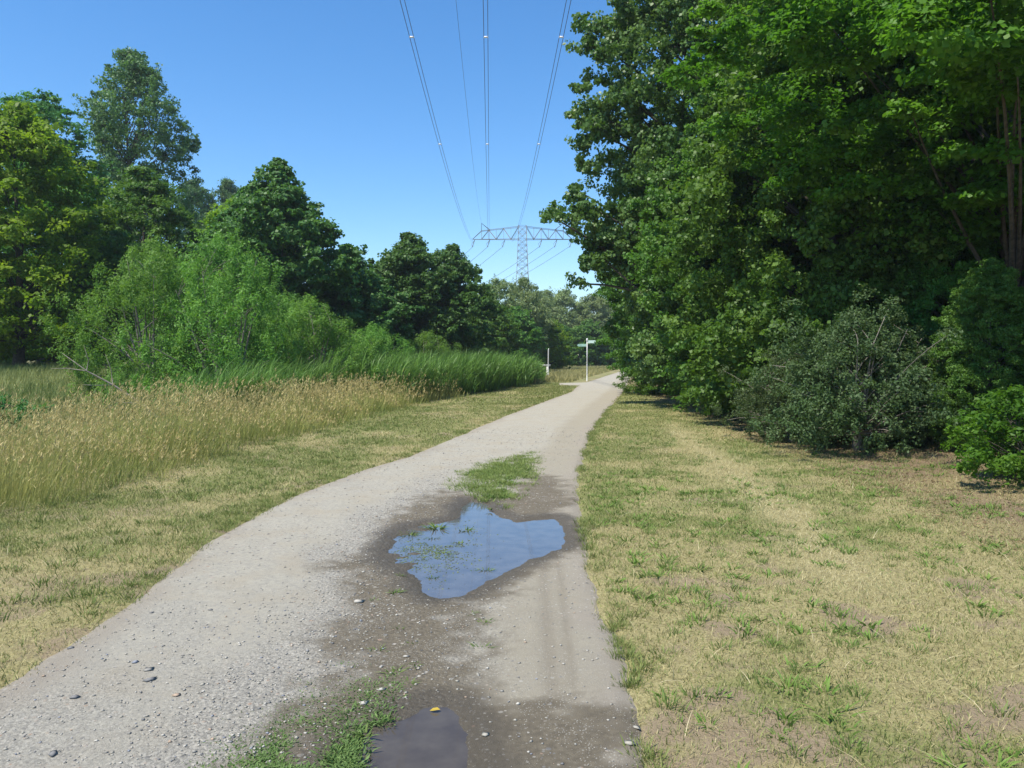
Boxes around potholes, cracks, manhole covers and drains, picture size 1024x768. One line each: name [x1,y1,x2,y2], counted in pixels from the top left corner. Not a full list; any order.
pothole [312,694,488,768]
pothole [374,498,575,600]
